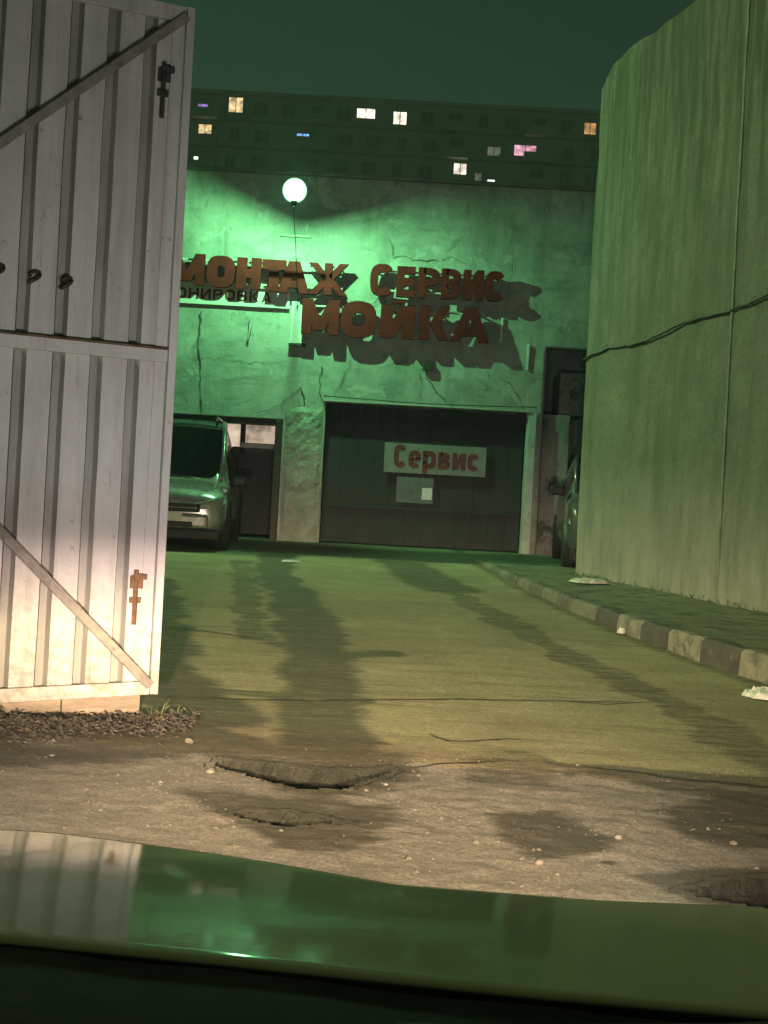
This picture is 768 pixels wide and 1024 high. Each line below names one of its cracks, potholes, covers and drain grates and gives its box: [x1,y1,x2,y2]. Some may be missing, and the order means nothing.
crack [140,695,684,705]
crack [430,734,507,742]
pothole [215,807,359,829]
pothole [203,755,403,792]
crack [582,766,768,788]
pothole [667,871,768,909]
